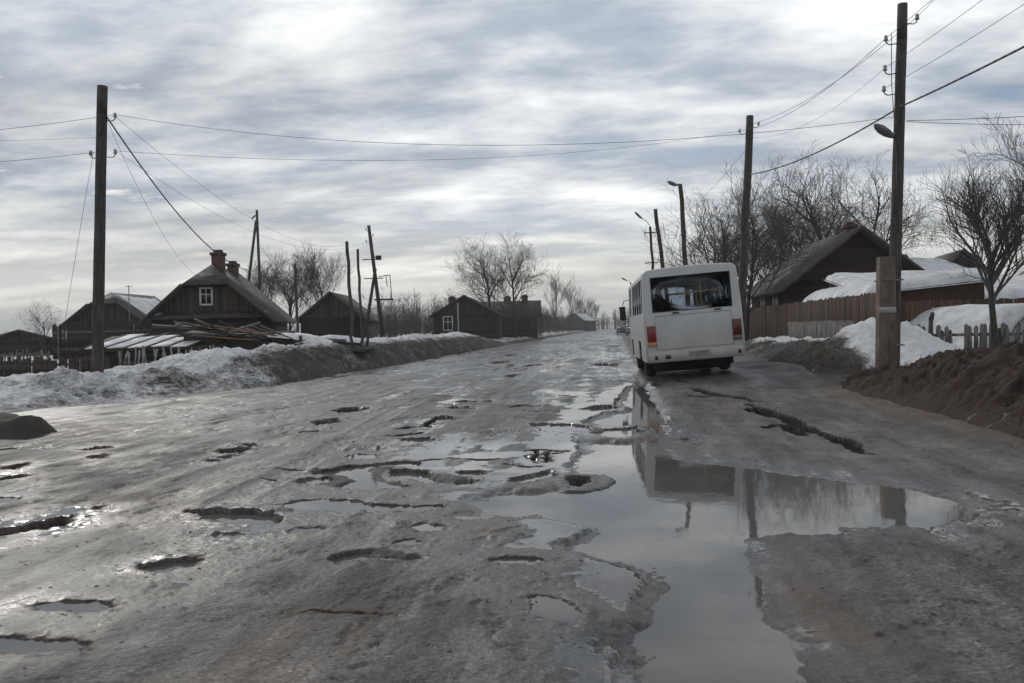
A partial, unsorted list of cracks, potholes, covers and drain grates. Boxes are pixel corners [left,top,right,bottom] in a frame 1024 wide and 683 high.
pothole [564,474,596,488]
pothole [326,546,425,564]
pothole [24,598,115,614]
pothole [213,446,255,454]
pothole [387,468,482,485]
pothole [0,632,94,655]
pothole [527,594,589,623]
pothole [0,514,78,537]
pothole [294,476,338,484]
pothole [131,554,203,573]
pothole [309,460,423,490]
pothole [488,554,551,565]
